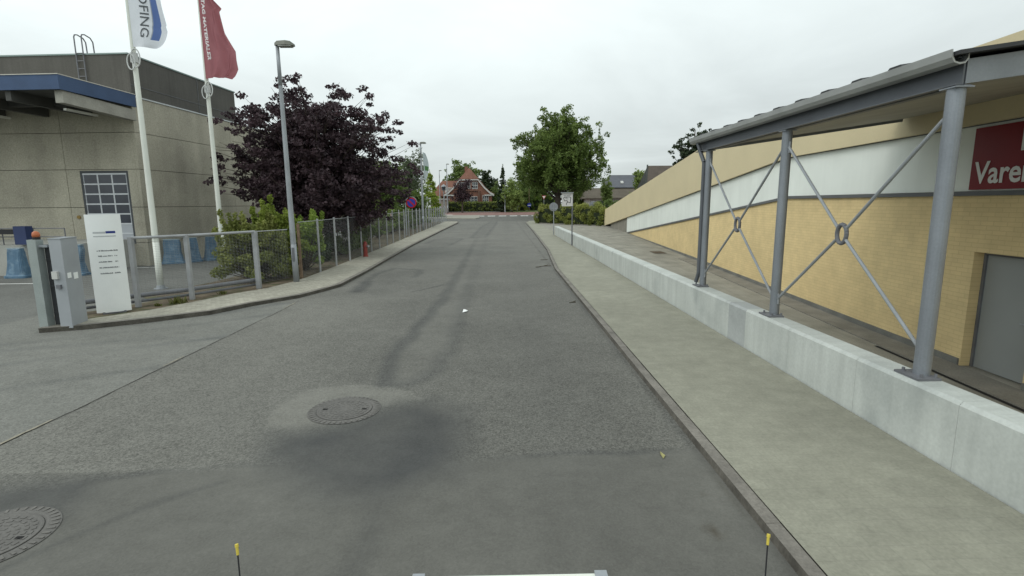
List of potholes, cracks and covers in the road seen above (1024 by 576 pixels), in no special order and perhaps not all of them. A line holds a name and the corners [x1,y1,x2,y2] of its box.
manhole cover [0,506,63,562]
manhole cover [307,396,381,424]
